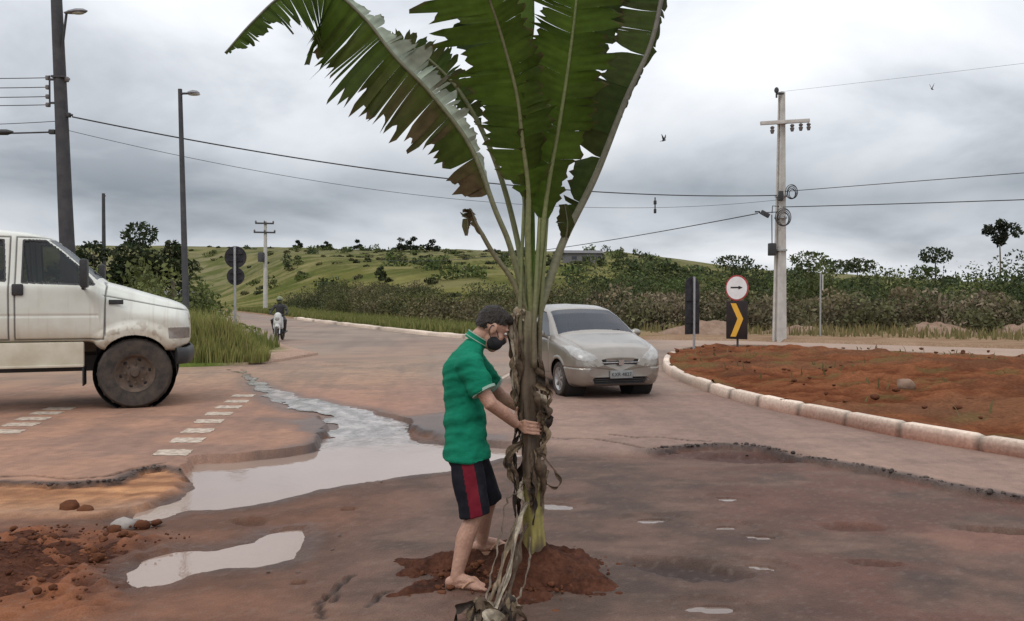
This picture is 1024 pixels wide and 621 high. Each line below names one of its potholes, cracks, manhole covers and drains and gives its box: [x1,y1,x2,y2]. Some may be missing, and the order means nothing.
pothole [593,445,1024,588]
pothole [122,438,549,522]
crack [551,434,713,448]
pothole [110,524,319,591]
pothole [0,467,184,520]
